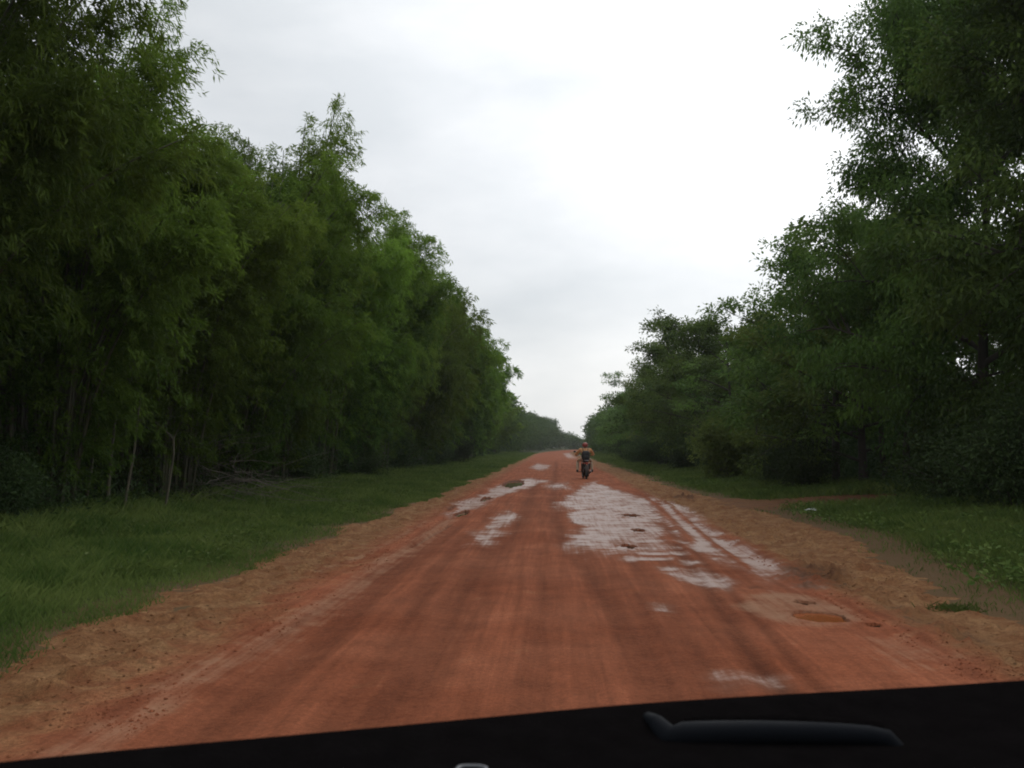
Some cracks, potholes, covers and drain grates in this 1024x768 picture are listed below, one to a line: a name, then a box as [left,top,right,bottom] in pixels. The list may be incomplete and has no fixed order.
pothole [782,609,858,628]
pothole [499,479,526,489]
pothole [616,543,643,552]
pothole [449,509,473,519]
pothole [785,599,825,609]
